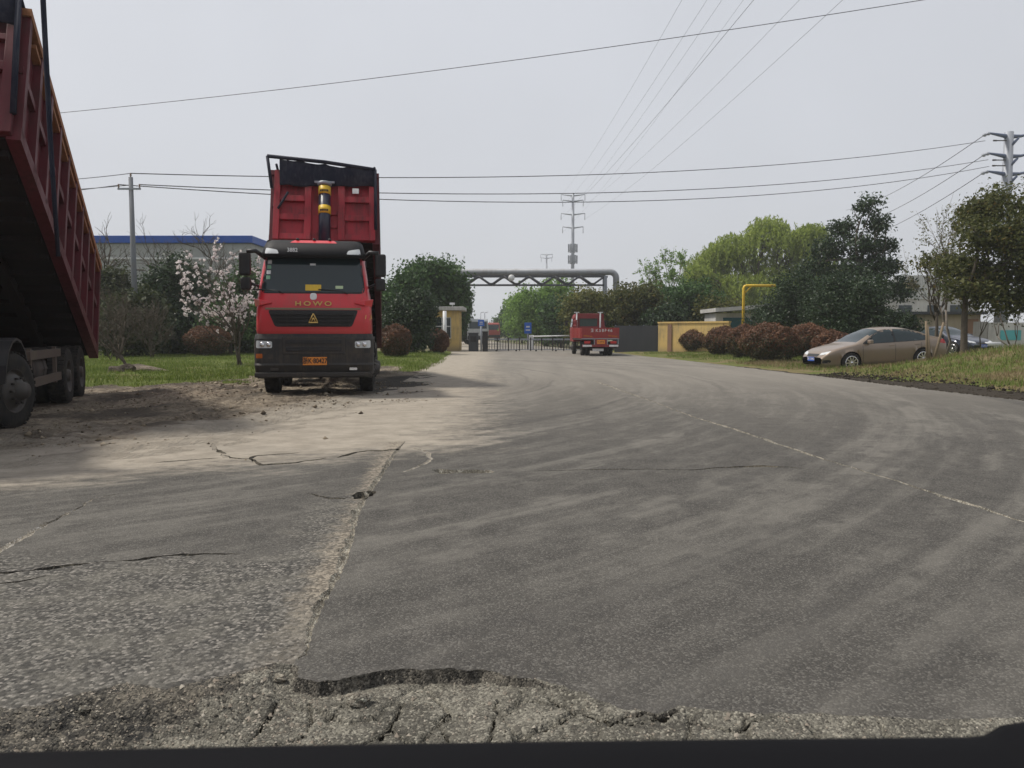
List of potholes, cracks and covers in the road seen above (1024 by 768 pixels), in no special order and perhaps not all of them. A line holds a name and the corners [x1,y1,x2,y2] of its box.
pothole [0,662,1024,752]
crack [156,442,433,472]
pothole [352,491,376,499]
crack [0,492,233,584]
